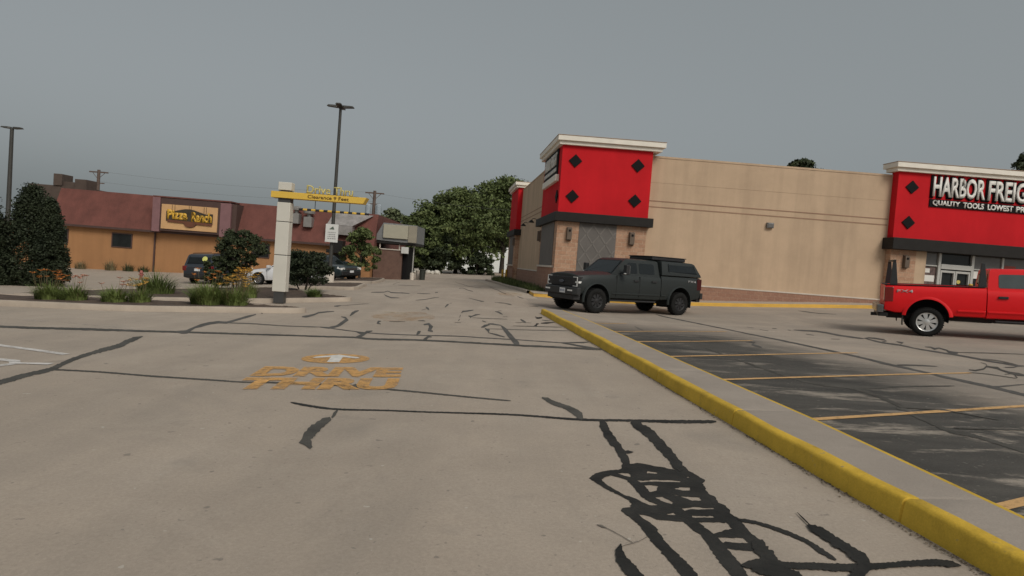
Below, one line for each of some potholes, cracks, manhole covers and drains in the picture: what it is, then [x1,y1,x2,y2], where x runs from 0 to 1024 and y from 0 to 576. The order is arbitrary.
crack [372,282,555,327]
